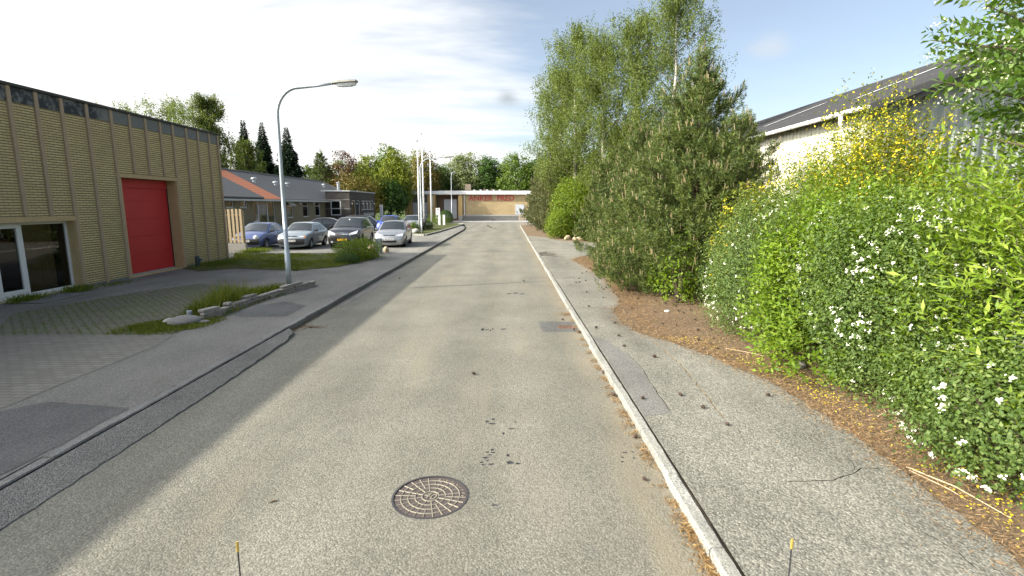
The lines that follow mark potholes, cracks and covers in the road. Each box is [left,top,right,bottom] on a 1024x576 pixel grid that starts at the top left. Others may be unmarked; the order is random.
crack [787,457,880,482]
manhole cover [391,476,469,519]
